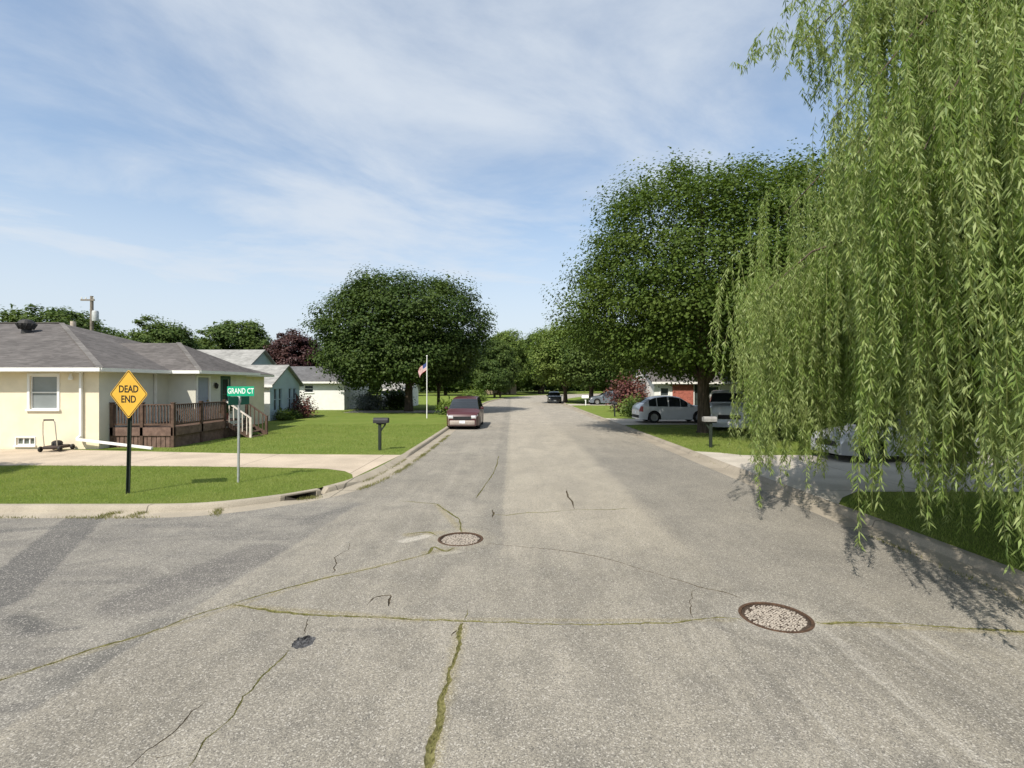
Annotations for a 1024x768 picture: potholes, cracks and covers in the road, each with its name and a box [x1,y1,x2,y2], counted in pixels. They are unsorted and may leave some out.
drain grate [279,488,321,501]
manhole cover [438,532,483,546]
pothole [291,635,316,649]
crack [817,620,1024,633]
crack [0,457,739,768]
manhole cover [738,602,815,633]
